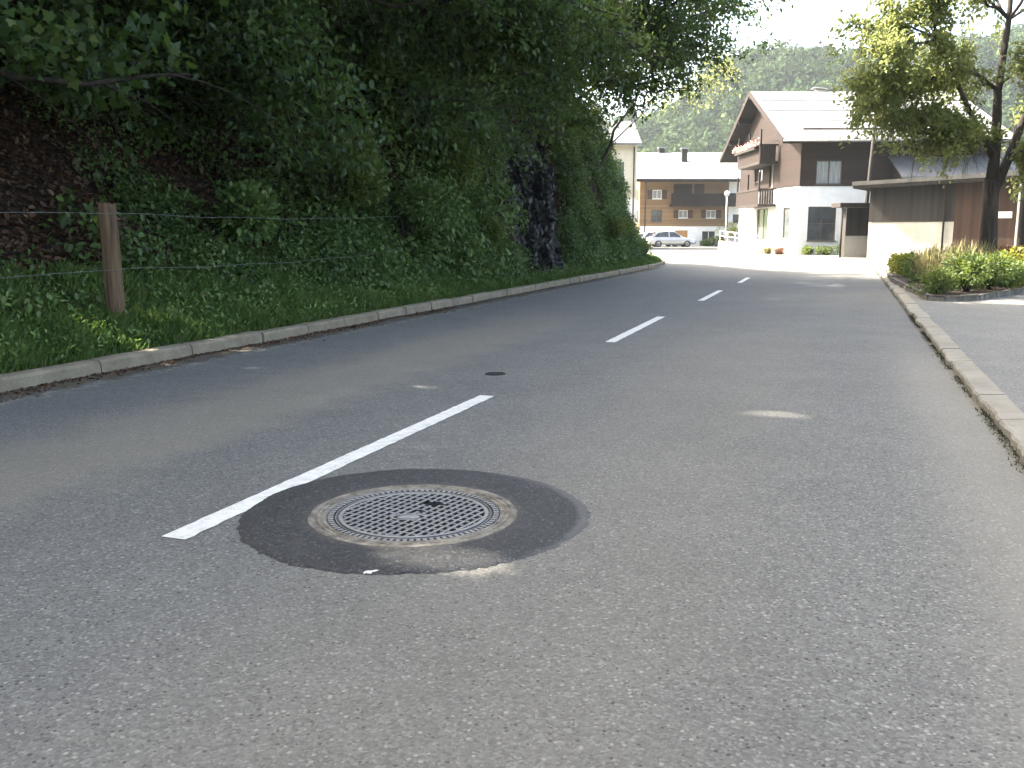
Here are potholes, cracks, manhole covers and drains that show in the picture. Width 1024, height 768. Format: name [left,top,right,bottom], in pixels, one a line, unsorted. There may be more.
manhole cover [308,484,517,547]
